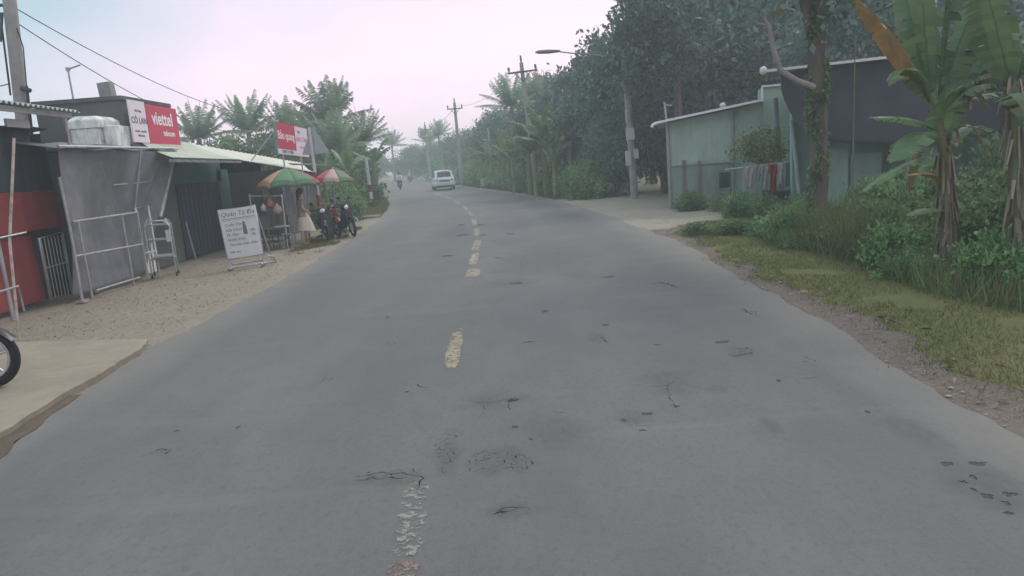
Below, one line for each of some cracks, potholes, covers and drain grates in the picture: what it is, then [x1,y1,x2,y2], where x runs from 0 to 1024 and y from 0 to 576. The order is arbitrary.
crack [490,506,529,515]
crack [354,434,533,490]
